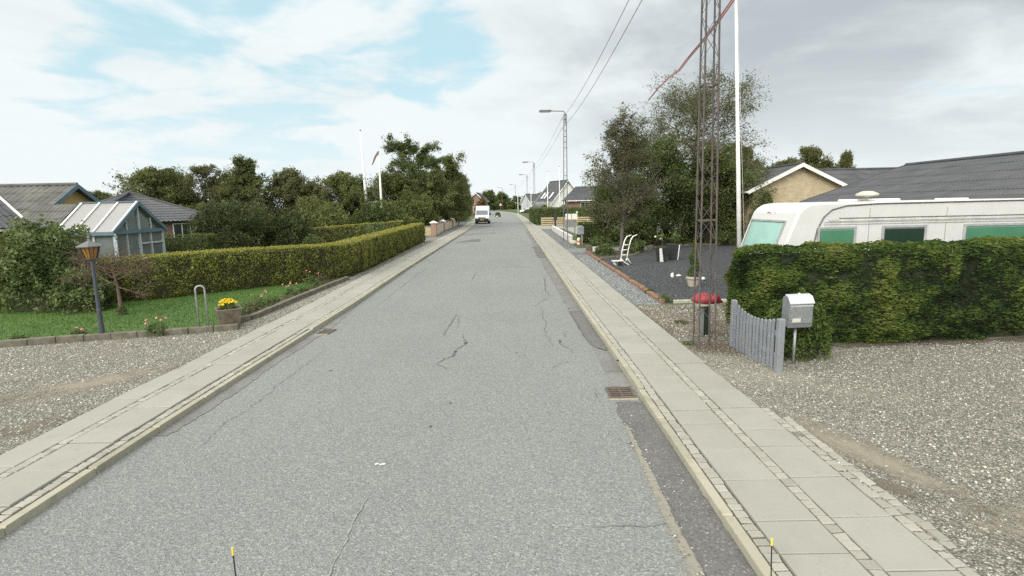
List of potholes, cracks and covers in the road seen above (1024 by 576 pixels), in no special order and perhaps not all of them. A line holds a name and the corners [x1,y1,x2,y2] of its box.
drain grate [605,387,639,401]
crack [537,278,604,368]
